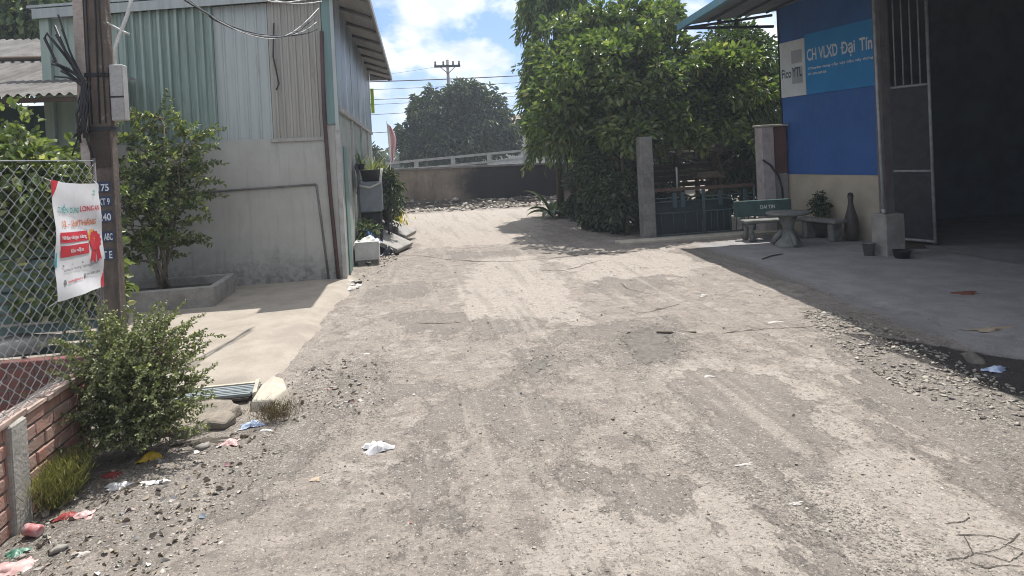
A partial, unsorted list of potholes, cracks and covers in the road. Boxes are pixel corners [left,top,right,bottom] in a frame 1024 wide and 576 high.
crack [418,251,634,271]
